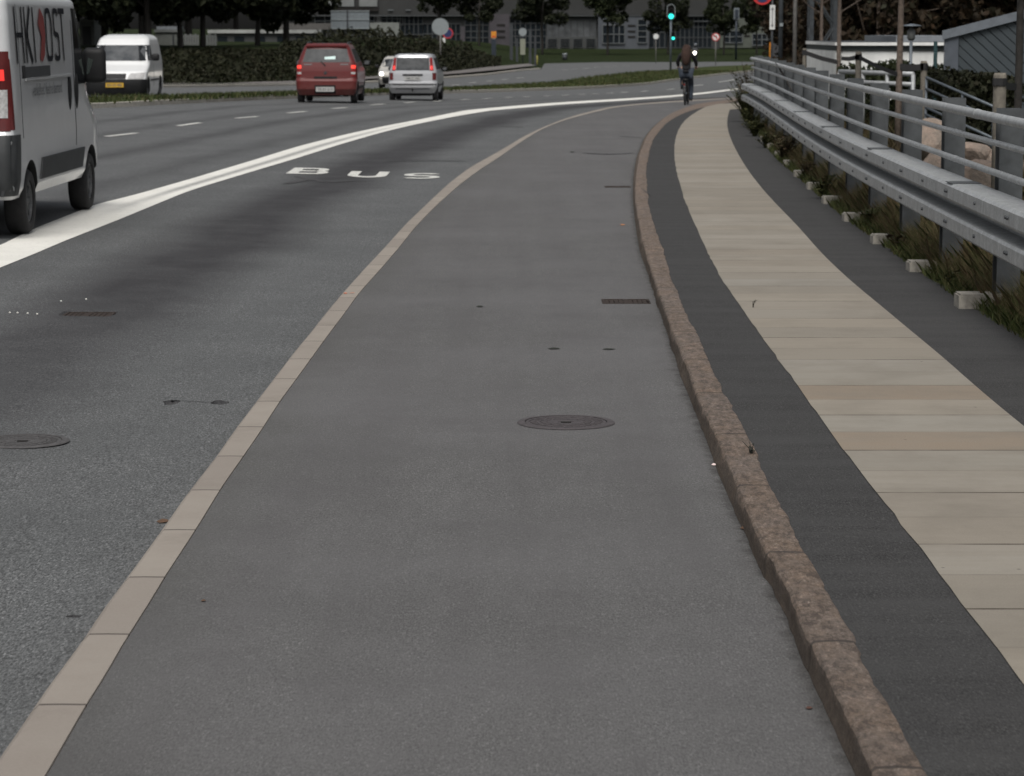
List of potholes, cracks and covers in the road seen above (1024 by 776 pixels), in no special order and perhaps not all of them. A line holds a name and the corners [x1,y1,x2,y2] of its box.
manhole cover [0,434,70,448]
manhole cover [517,415,615,430]
